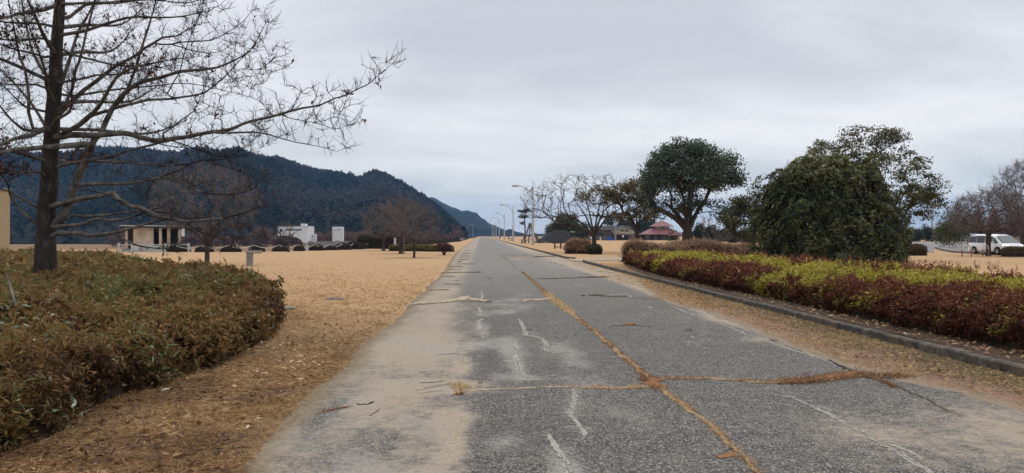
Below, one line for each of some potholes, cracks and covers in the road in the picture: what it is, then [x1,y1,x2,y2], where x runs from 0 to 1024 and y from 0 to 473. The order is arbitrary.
crack [409,253,967,473]
